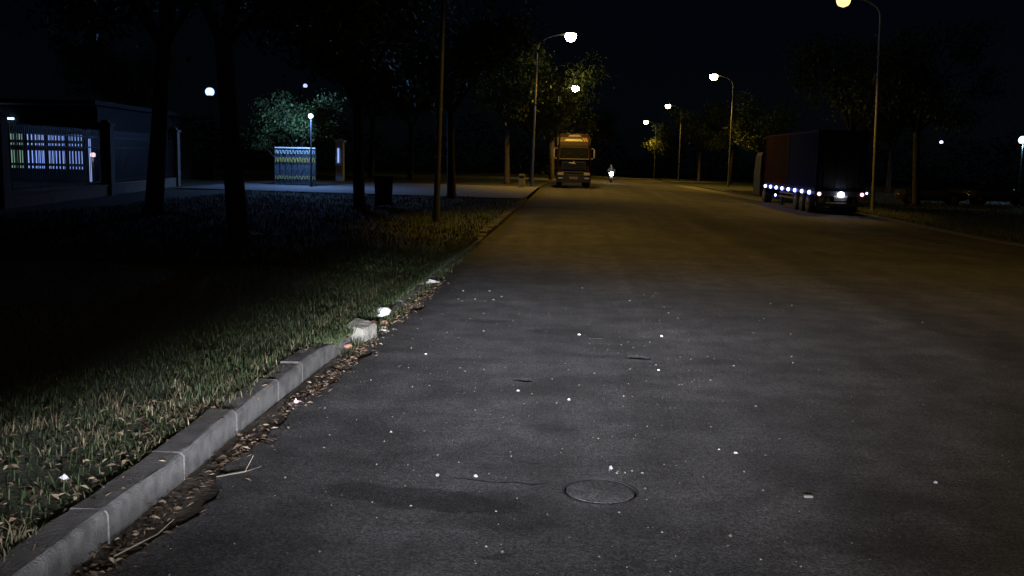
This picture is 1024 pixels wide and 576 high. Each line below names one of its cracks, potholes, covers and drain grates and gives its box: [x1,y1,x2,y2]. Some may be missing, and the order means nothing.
crack [451,461,549,485]
manhole cover [562,478,639,504]
